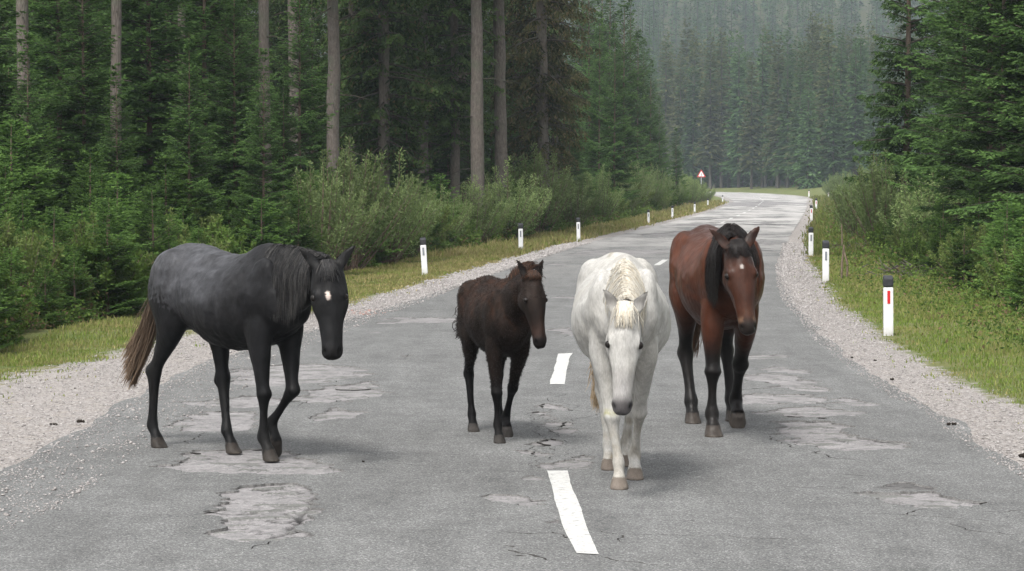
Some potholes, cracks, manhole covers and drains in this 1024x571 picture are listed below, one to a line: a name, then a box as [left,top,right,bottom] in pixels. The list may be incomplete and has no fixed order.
crack [503,532,567,560]
pothole [768,420,912,451]
crack [526,393,600,469]
pothole [203,483,325,542]
pothole [148,449,347,475]
pothole [280,381,396,404]
pothole [750,406,868,419]
pothole [878,482,938,491]
